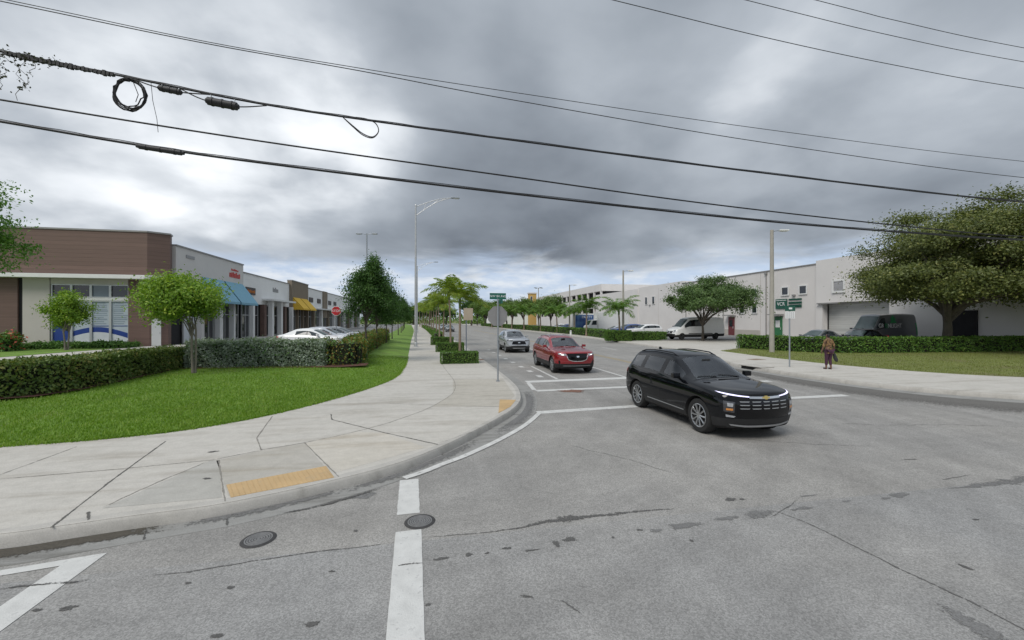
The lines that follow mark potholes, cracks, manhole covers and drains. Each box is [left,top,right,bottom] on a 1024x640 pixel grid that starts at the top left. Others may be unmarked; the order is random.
crack [777,511,1024,630]
manhole cover [239,531,277,548]
manhole cover [404,514,435,529]
crack [496,508,674,532]
